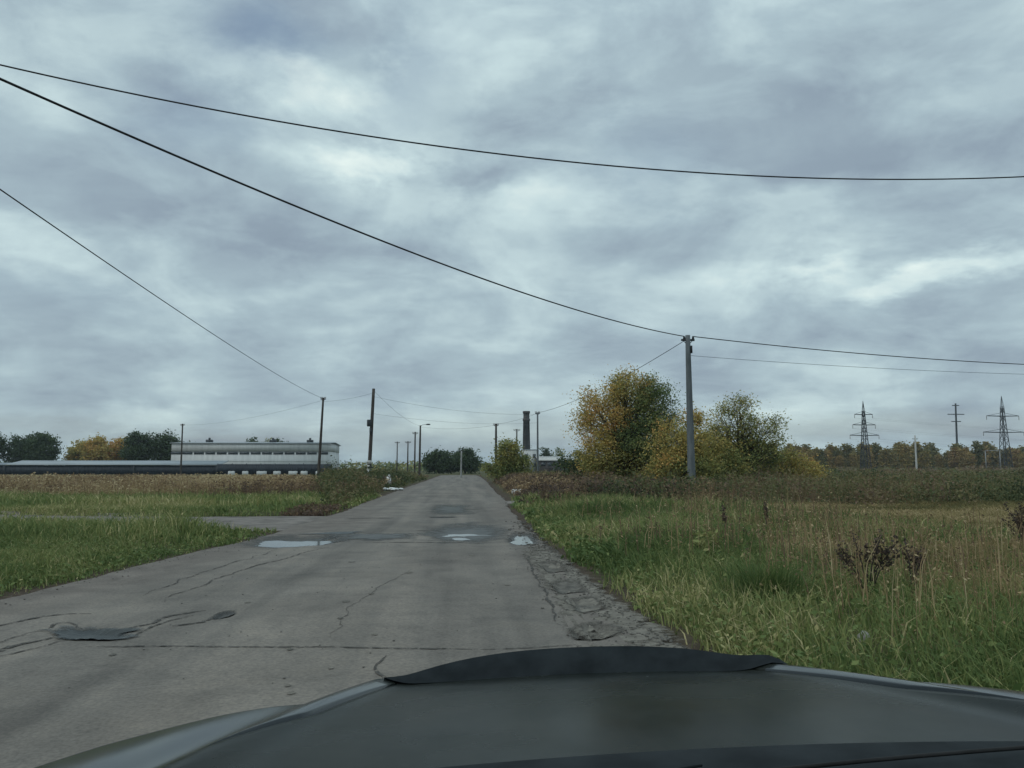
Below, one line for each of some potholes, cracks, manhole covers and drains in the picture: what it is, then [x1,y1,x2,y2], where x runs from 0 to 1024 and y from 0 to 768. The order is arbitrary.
crack [147,548,322,598]
pothole [568,621,624,641]
crack [97,610,462,679]
pothole [255,536,339,548]
crack [0,613,92,656]
